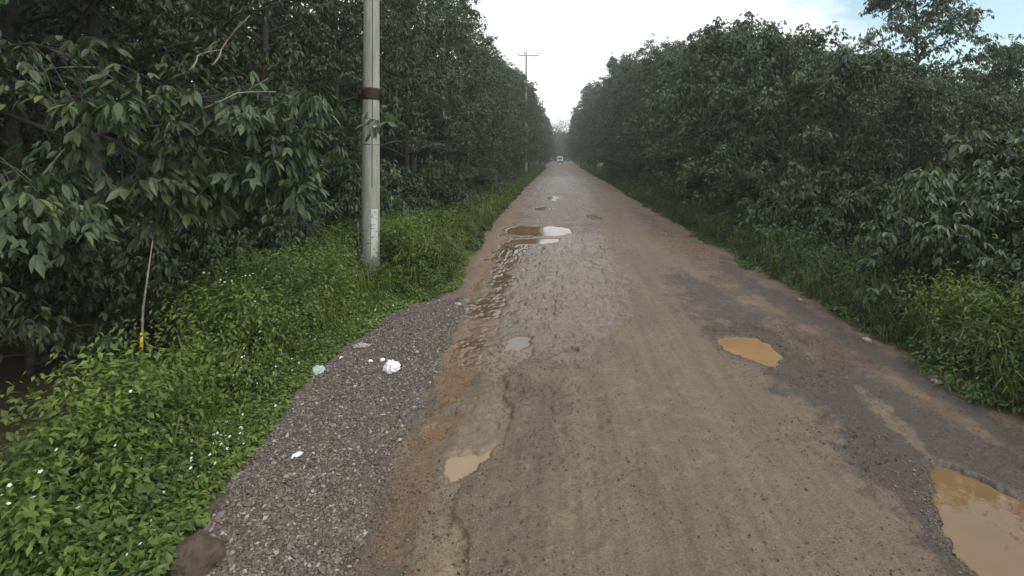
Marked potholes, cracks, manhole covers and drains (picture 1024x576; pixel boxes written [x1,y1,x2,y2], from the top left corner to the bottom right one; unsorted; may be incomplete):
pothole [503,225,576,236]
pothole [499,332,538,353]
pothole [915,452,1024,576]
pothole [431,439,507,488]
pothole [711,333,789,369]
